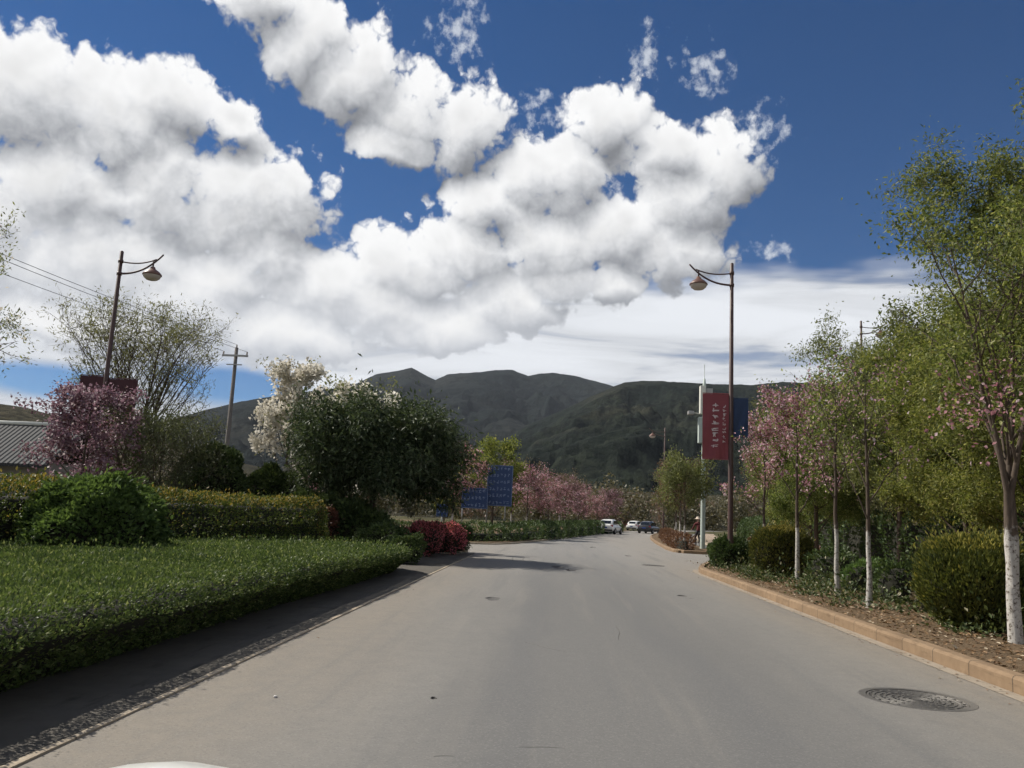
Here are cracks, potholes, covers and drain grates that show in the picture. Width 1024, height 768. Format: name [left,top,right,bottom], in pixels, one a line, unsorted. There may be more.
manhole cover [858,687,979,712]
